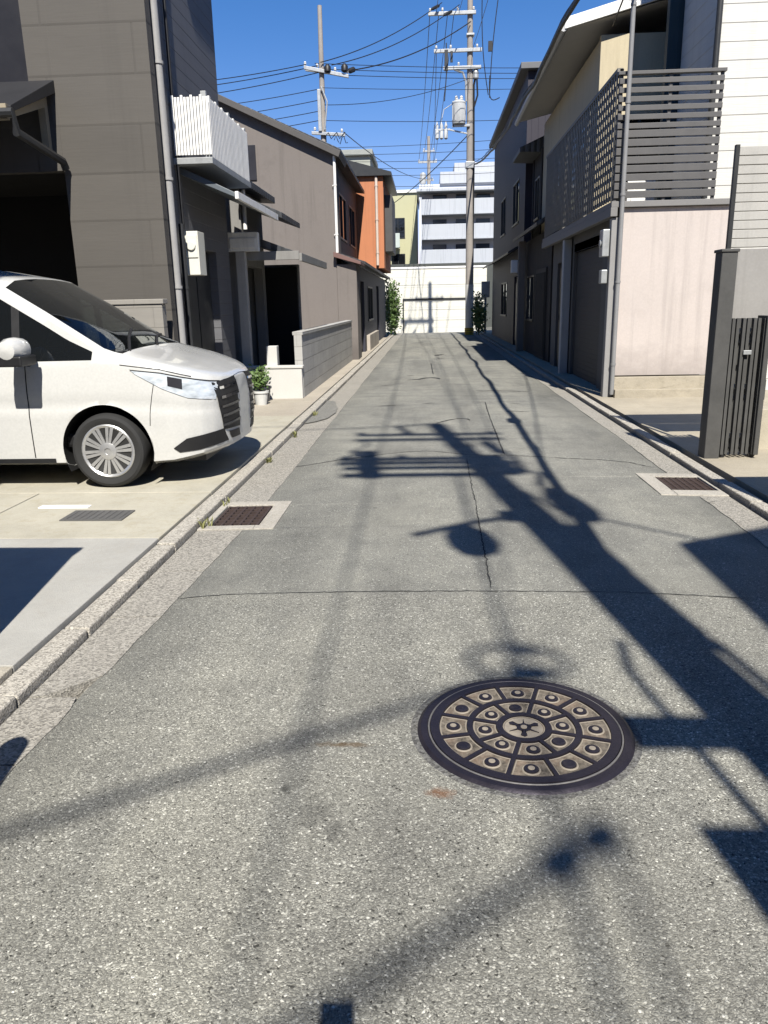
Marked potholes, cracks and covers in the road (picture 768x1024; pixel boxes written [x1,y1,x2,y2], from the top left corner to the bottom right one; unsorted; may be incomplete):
crack [408,338,443,380]
drain grate [635,473,729,497]
crack [178,390,746,599]
manhole cover [411,677,643,800]
drain grate [197,501,292,531]
